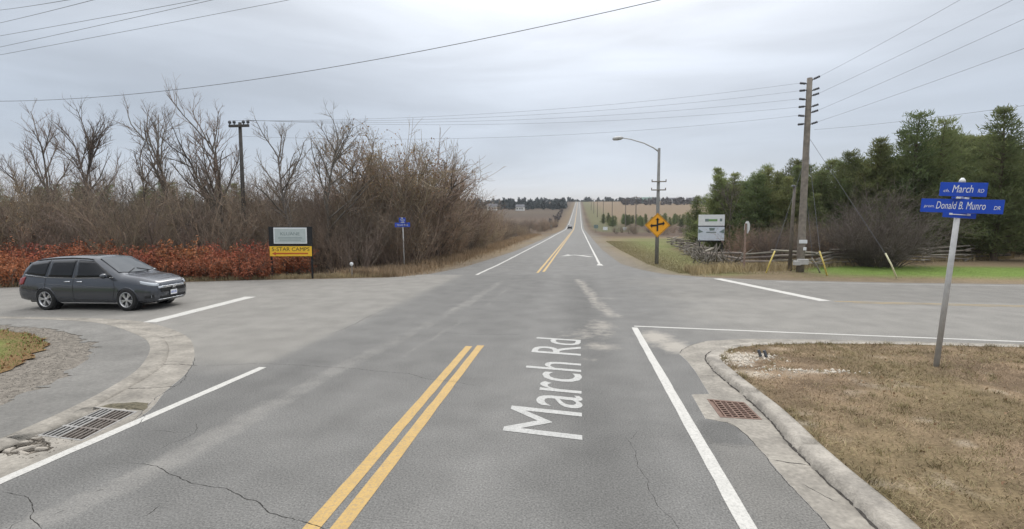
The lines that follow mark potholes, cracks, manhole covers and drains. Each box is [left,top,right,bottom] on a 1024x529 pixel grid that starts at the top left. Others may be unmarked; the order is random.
drain grate [707,399,762,444]
crack [129,462,324,529]
drain grate [37,407,138,441]
pothole [0,437,54,455]
crack [7,492,64,529]
